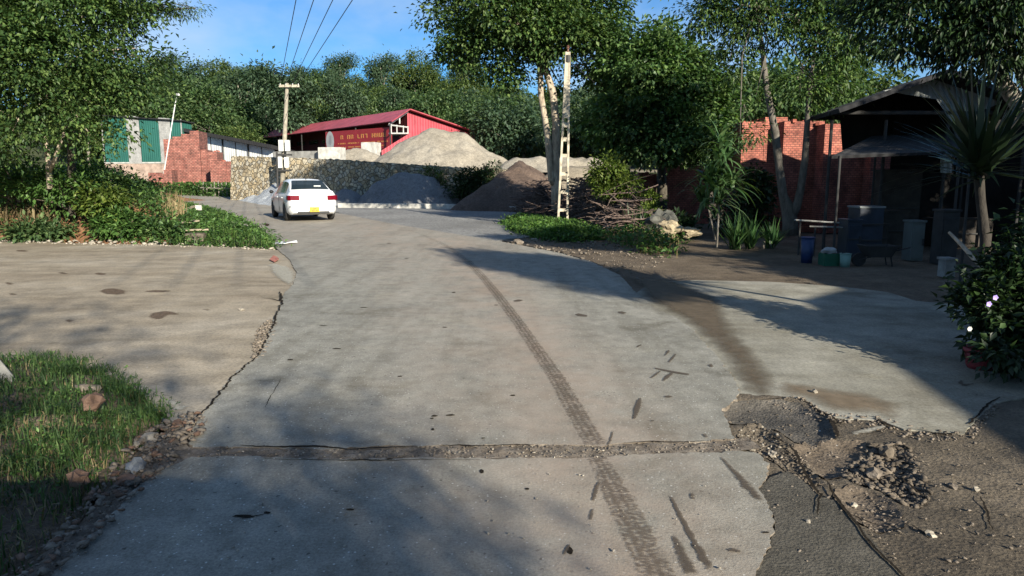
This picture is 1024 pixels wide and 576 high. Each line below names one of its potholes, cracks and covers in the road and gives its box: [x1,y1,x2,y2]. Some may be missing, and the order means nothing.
pothole [833,484,905,533]
crack [189,291,288,425]
pothole [847,443,930,506]
pothole [722,399,837,446]
pothole [737,423,822,485]
crack [762,398,931,576]
crack [921,397,1000,434]
